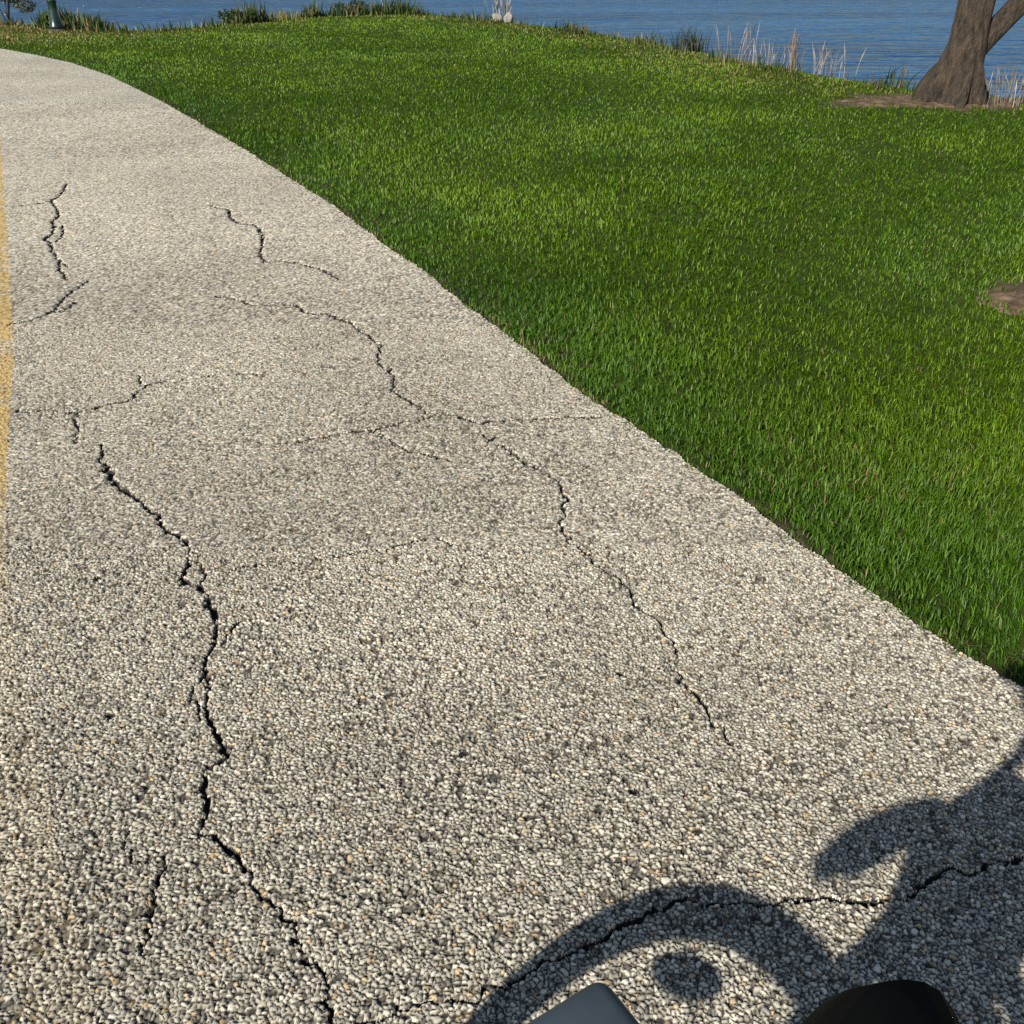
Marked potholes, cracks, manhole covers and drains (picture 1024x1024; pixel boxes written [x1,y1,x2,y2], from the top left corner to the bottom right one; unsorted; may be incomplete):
crack [210,204,339,280]
crack [7,184,89,327]
crack [12,373,263,444]
crack [97,444,335,1024]
crack [214,296,744,747]
crack [353,855,1024,1024]
